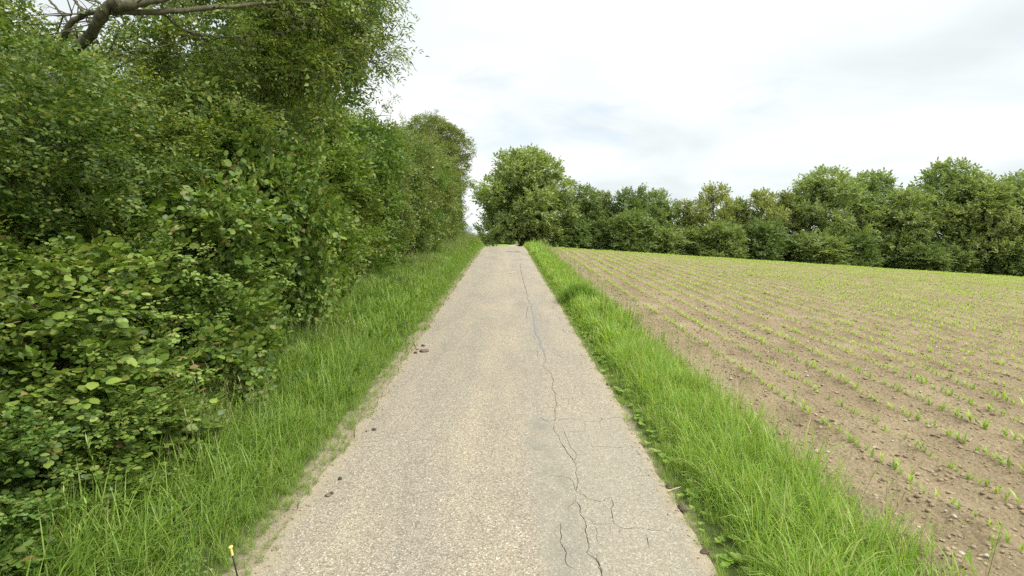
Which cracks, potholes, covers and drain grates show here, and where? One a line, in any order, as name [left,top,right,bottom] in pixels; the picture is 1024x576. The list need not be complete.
crack [520,267,661,576]
